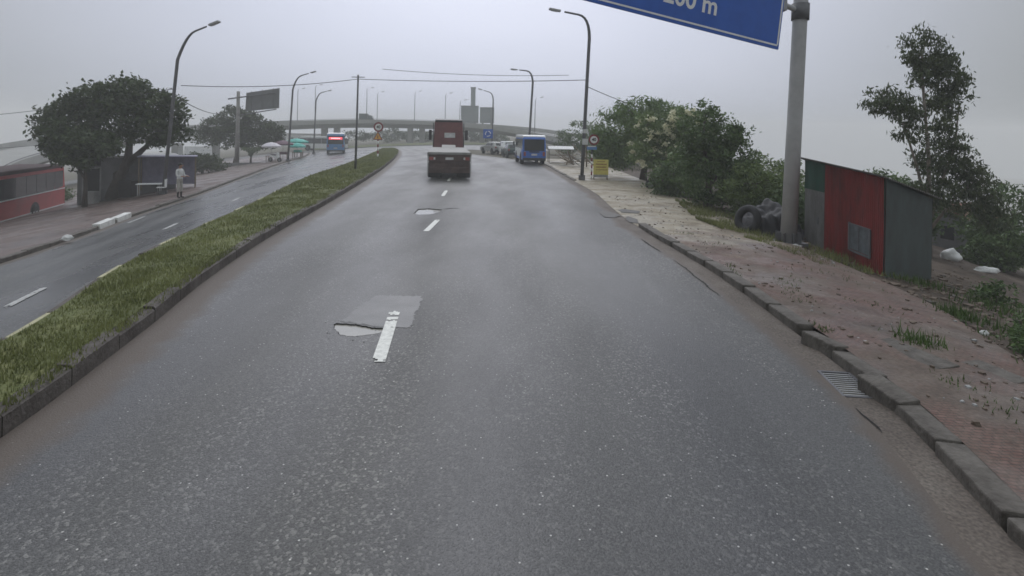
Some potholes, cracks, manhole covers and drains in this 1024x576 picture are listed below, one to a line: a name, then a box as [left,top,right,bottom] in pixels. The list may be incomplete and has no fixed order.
crack [641,239,719,295]
drain grate [817,370,873,399]
pothole [313,321,398,342]
